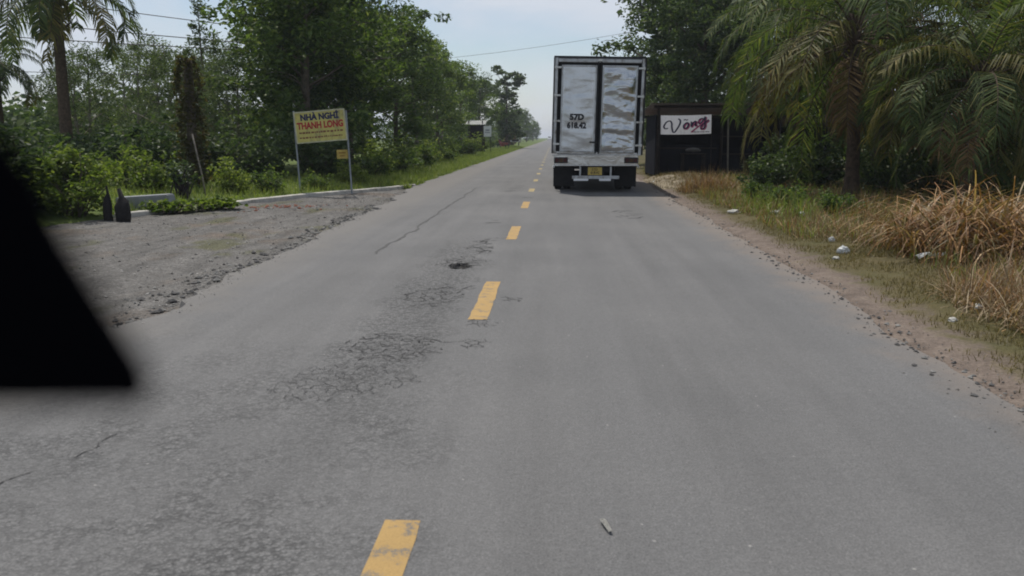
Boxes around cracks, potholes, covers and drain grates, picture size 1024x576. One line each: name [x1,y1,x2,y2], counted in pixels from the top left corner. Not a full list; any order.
crack [375,188,475,254]
crack [458,319,498,348]
crack [404,285,476,307]
